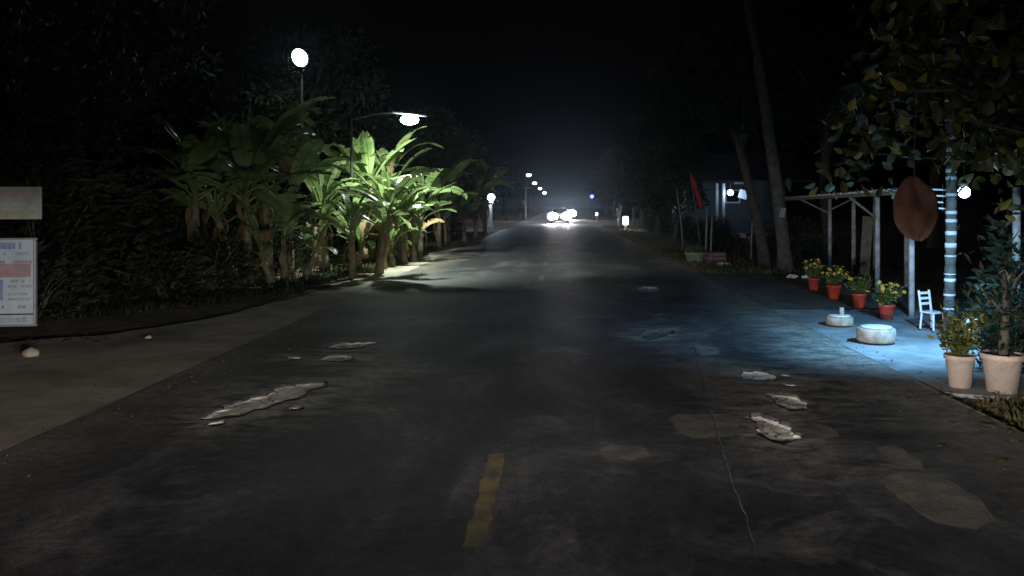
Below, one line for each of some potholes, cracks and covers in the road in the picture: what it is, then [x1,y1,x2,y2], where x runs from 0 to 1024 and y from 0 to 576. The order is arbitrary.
pothole [738,369,778,382]
pothole [764,392,810,412]
pothole [325,341,379,350]
pothole [197,381,328,423]
crack [692,345,756,559]
pothole [743,413,804,445]
pothole [639,329,675,341]
